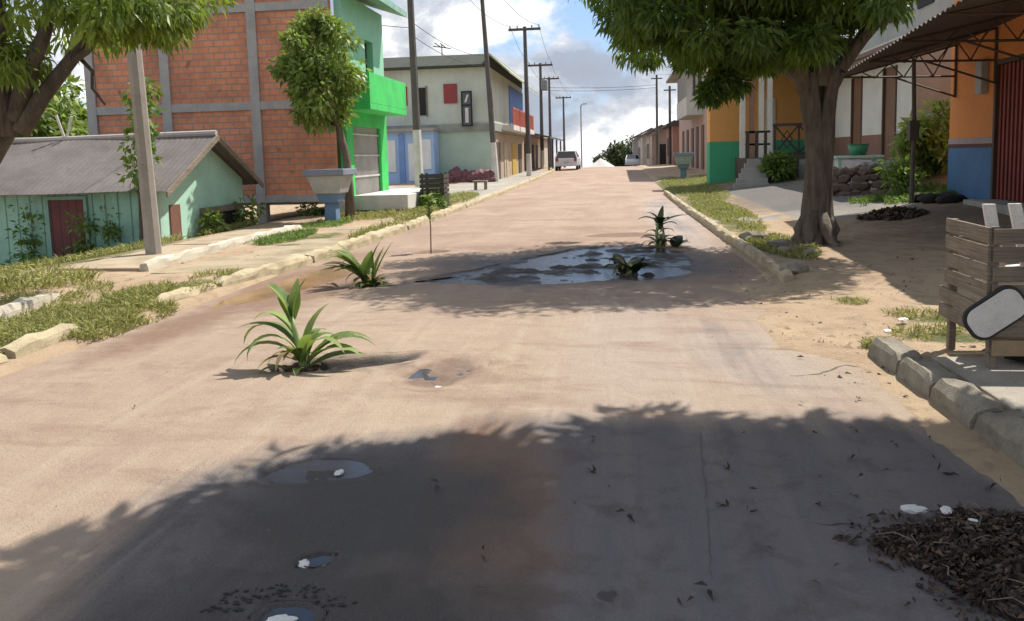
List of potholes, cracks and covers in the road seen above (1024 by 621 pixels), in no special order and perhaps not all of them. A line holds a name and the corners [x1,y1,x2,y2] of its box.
pothole [242,454,395,488]
pothole [250,601,326,621]
pothole [389,353,490,393]
pothole [297,553,336,568]
pothole [387,243,706,287]
